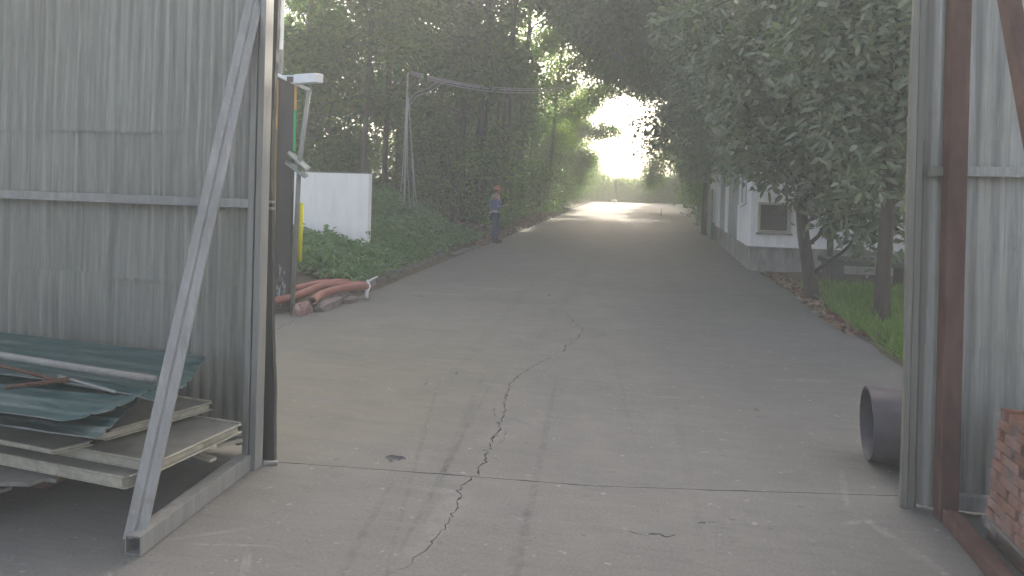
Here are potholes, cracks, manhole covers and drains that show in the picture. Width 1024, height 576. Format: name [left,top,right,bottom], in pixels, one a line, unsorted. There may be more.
crack [390,313,598,574]
